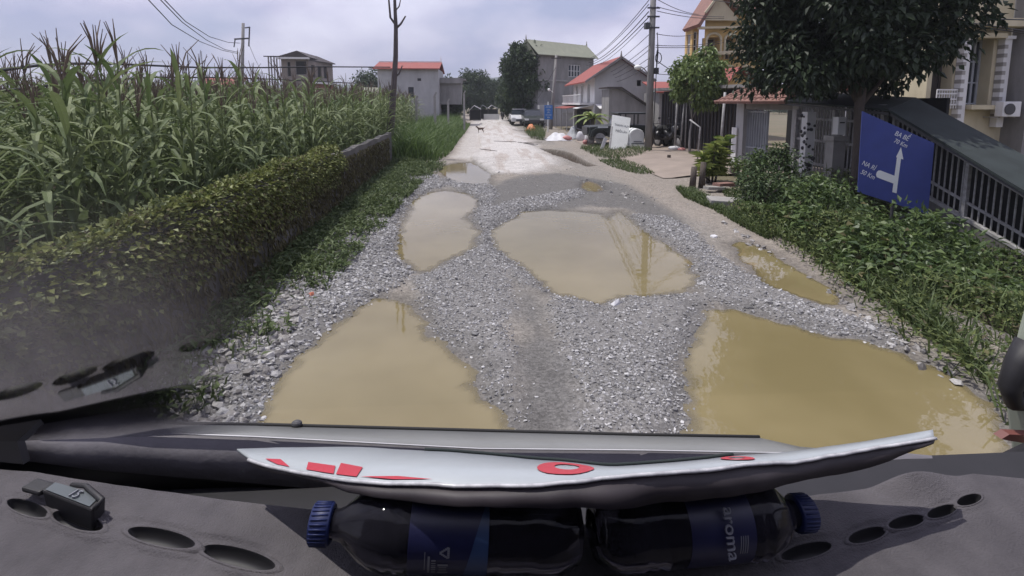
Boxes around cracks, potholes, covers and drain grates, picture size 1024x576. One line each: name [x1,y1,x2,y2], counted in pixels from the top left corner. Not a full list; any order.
pothole [579,181,606,192]
pothole [481,209,708,306]
pothole [540,148,598,167]
pothole [660,302,1012,455]
pothole [245,292,534,430]
pothole [723,239,855,307]
pothole [435,161,495,185]
pothole [387,189,485,273]
